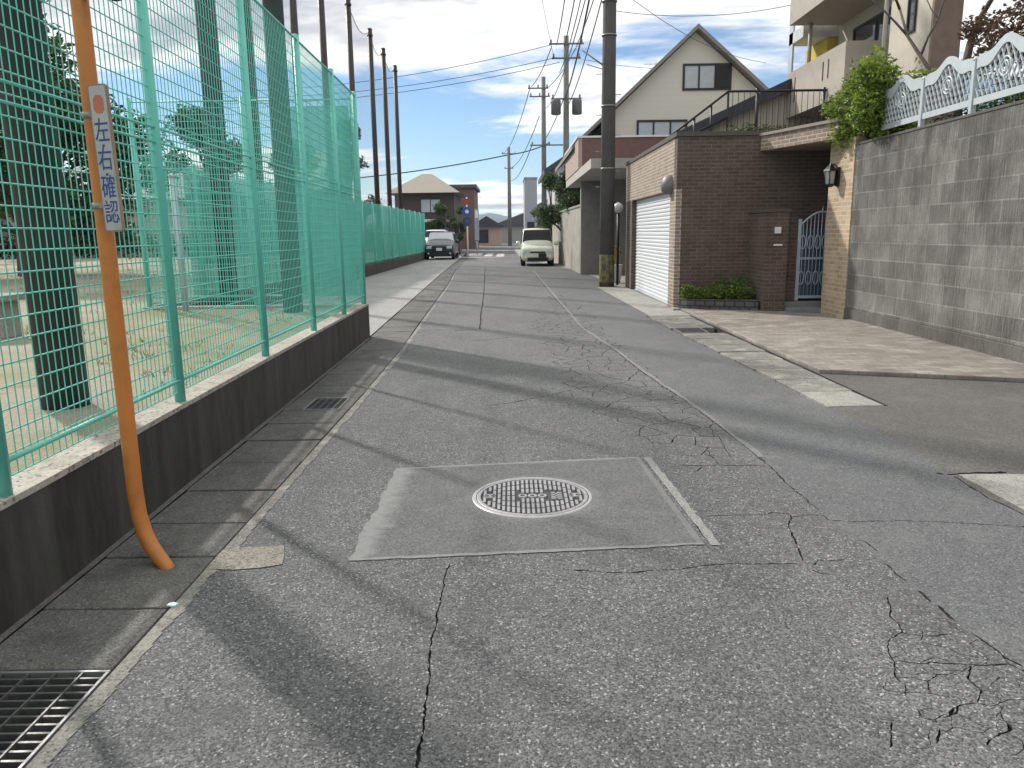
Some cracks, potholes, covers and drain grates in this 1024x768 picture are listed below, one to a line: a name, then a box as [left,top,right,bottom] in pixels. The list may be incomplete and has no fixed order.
drain grate [0,670,111,768]
manhole cover [472,477,593,518]
crack [495,273,1024,755]
drain grate [302,397,350,410]
crack [471,273,509,341]
crack [415,565,450,768]
